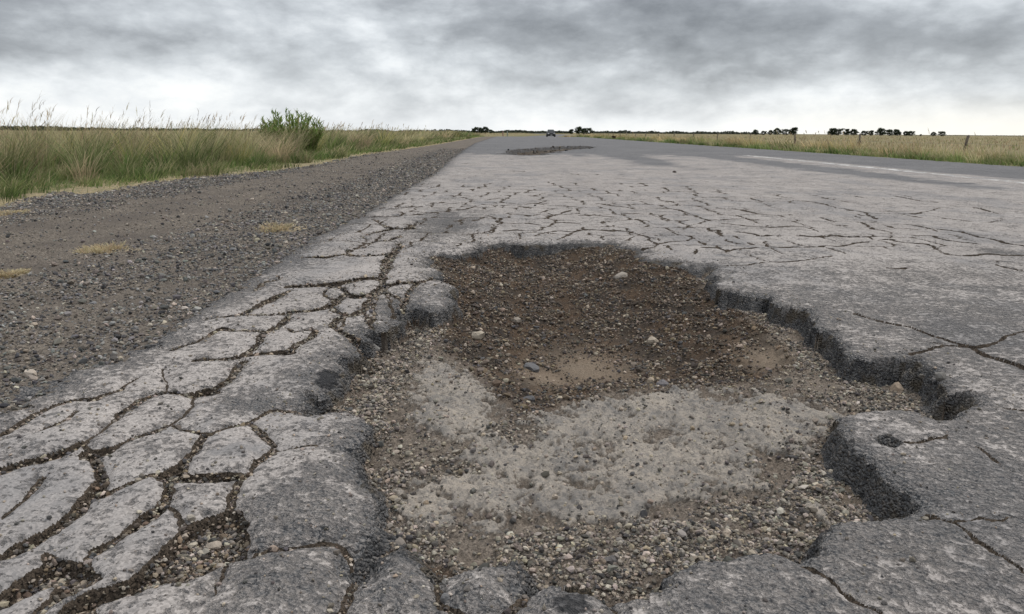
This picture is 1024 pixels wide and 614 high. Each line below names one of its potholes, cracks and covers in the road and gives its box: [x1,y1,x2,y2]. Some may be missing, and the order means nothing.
pothole [303,242,978,609]
crack [0,171,1024,614]
